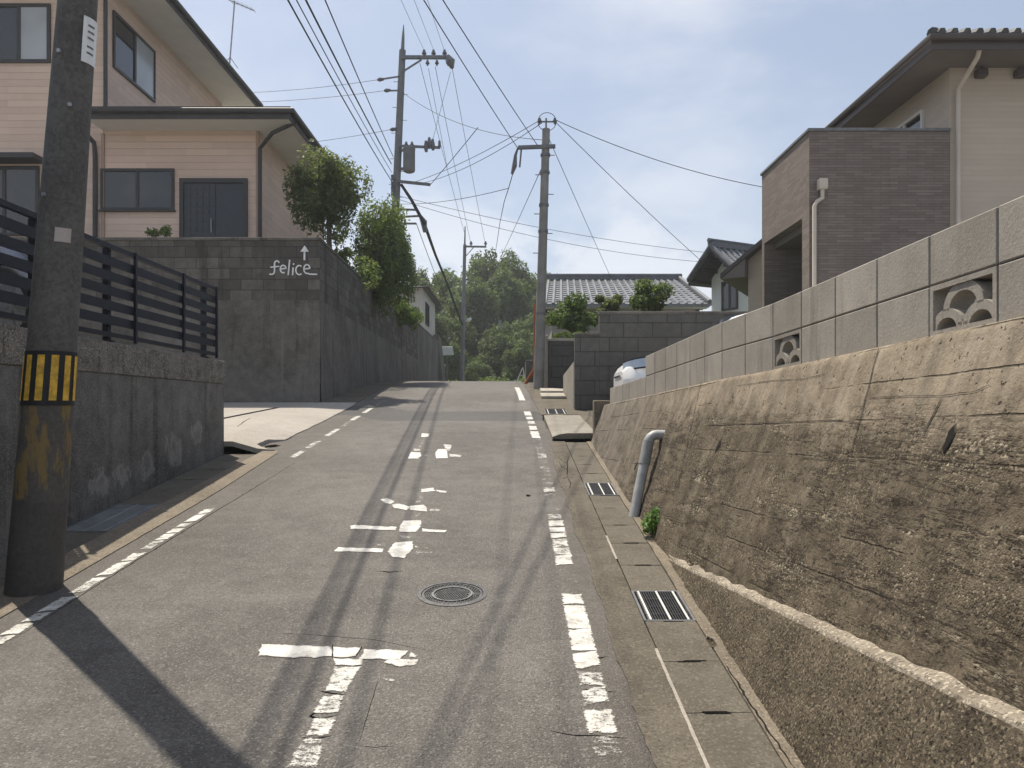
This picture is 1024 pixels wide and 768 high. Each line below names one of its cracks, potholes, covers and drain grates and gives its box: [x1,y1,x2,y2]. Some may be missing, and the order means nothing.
drain grate [631,590,696,624]
manhole cover [417,581,487,607]
crack [302,691,346,739]
drain grate [584,483,619,496]
crack [358,679,388,748]
